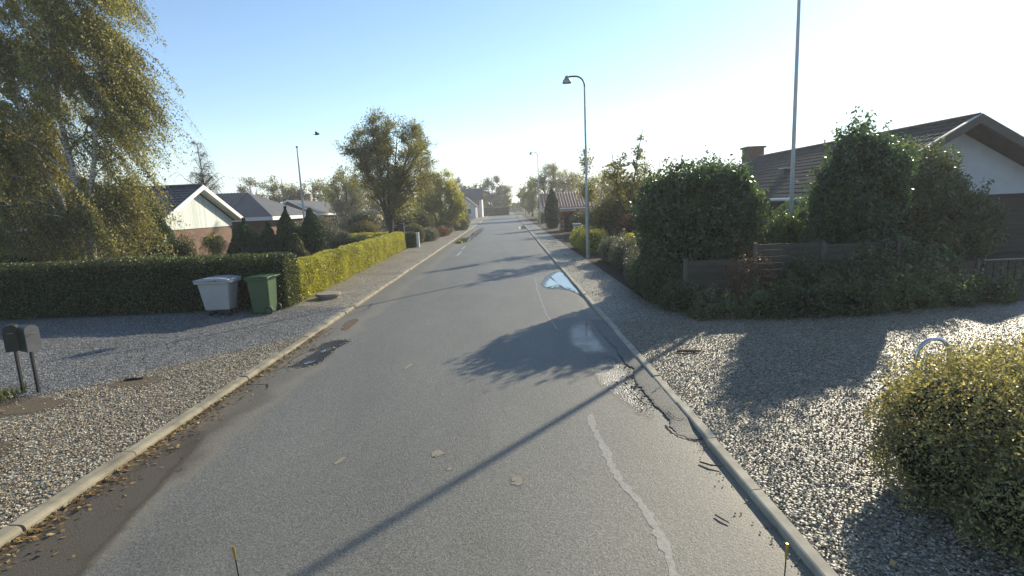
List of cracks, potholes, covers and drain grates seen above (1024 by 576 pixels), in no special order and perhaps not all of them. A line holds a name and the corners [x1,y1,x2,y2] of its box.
manhole cover [316,291,341,300]
crack [641,387,697,442]
